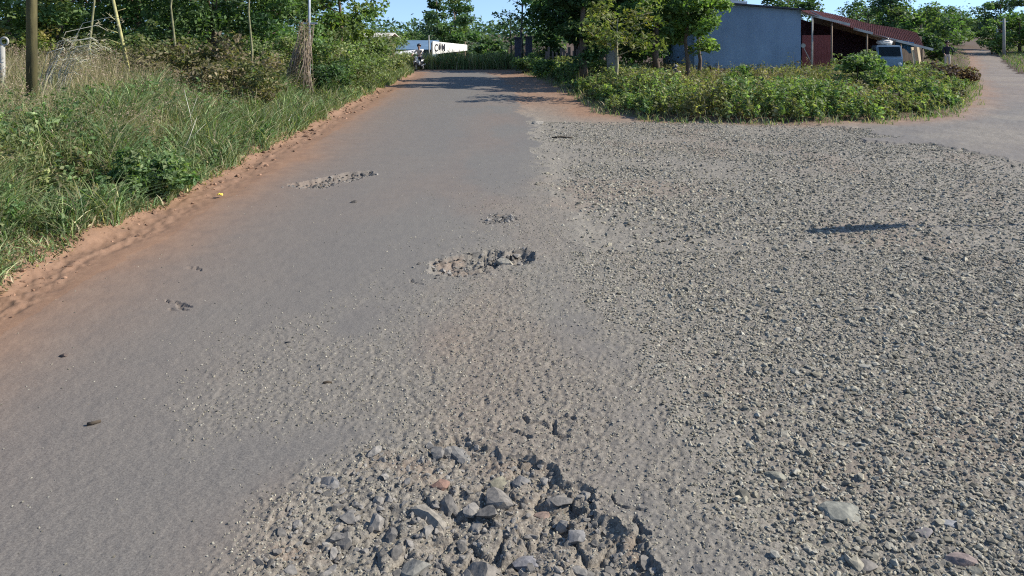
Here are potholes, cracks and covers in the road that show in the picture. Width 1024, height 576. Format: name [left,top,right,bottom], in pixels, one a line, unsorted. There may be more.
pothole [282,170,378,189]
pothole [478,213,528,227]
pothole [206,426,704,576]
pothole [413,247,542,280]
